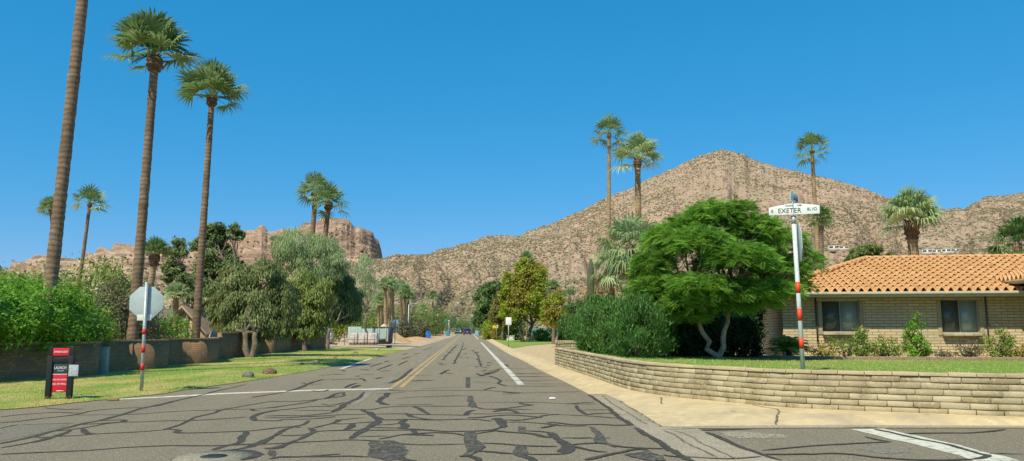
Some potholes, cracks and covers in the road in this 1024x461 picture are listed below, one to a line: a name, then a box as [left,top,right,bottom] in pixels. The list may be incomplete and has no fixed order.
manhole cover [172,450,253,461]
crack [602,396,735,458]
